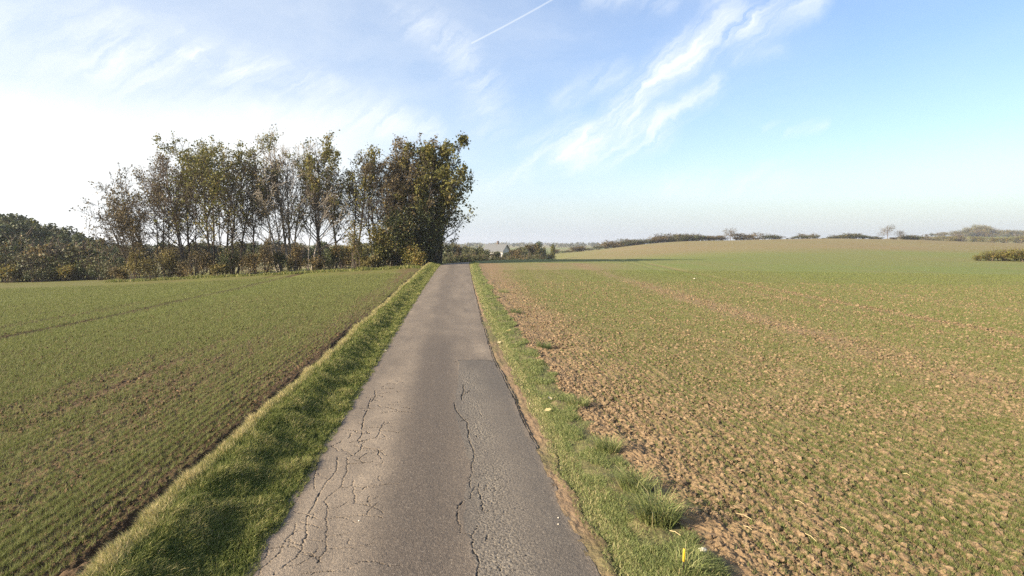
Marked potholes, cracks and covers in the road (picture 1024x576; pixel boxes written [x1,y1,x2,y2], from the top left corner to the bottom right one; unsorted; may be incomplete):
crack [274,381,410,575]
